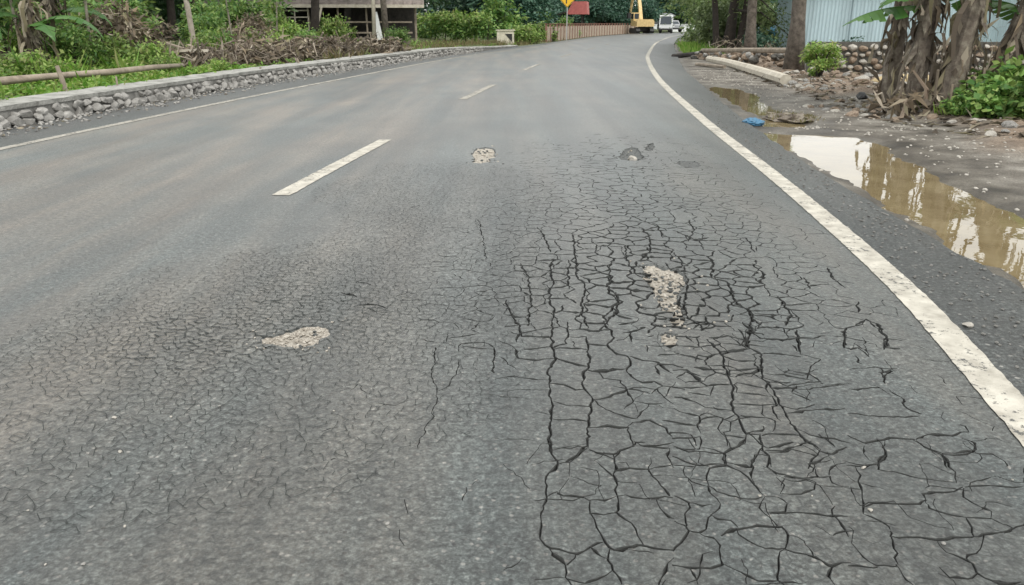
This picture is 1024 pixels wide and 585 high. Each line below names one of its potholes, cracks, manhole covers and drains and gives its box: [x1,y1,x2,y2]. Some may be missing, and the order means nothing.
crack [381,133,1024,585]
pothole [618,147,644,162]
pothole [246,318,346,353]
crack [0,163,571,532]
pothole [466,145,504,165]
